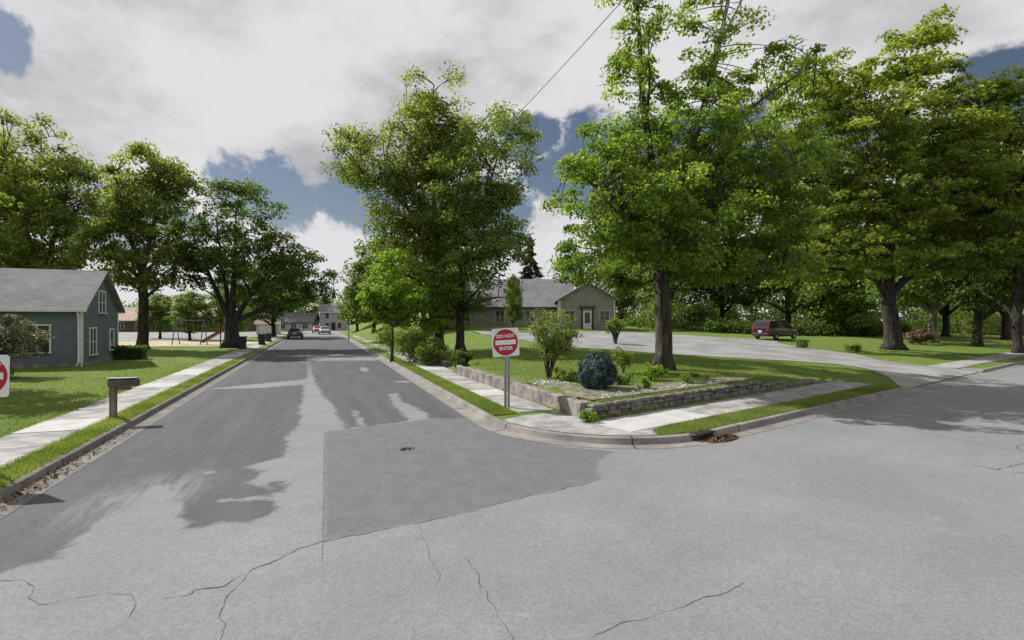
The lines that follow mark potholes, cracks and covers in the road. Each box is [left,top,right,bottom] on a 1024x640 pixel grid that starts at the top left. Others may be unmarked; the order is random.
drain grate [688,429,716,441]
crack [171,478,599,639]
crack [595,584,741,636]
crack [0,580,136,616]
